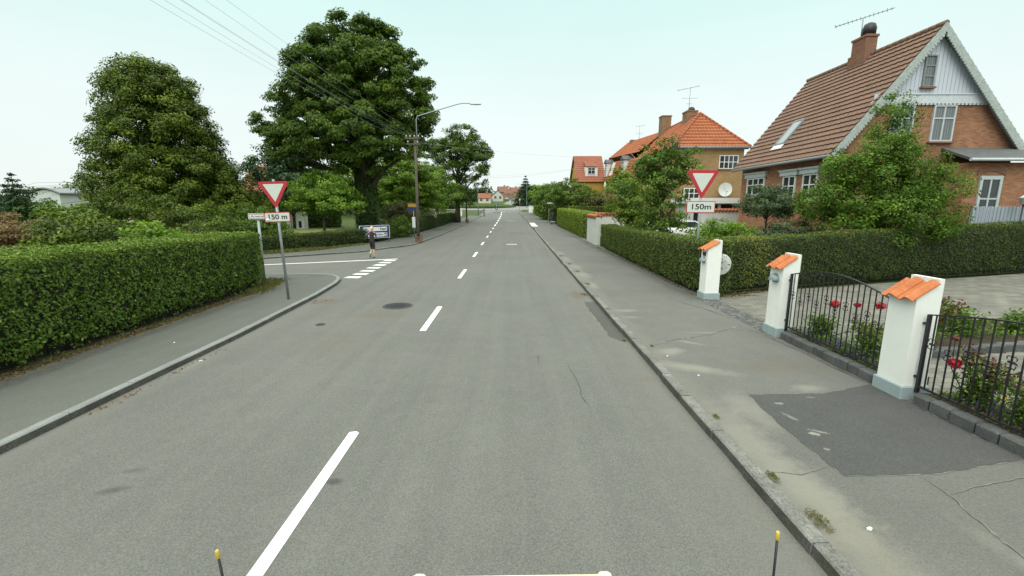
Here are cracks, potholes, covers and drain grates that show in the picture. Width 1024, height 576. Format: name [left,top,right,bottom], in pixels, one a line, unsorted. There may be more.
crack [653,303,864,382]
crack [926,477,1024,558]
